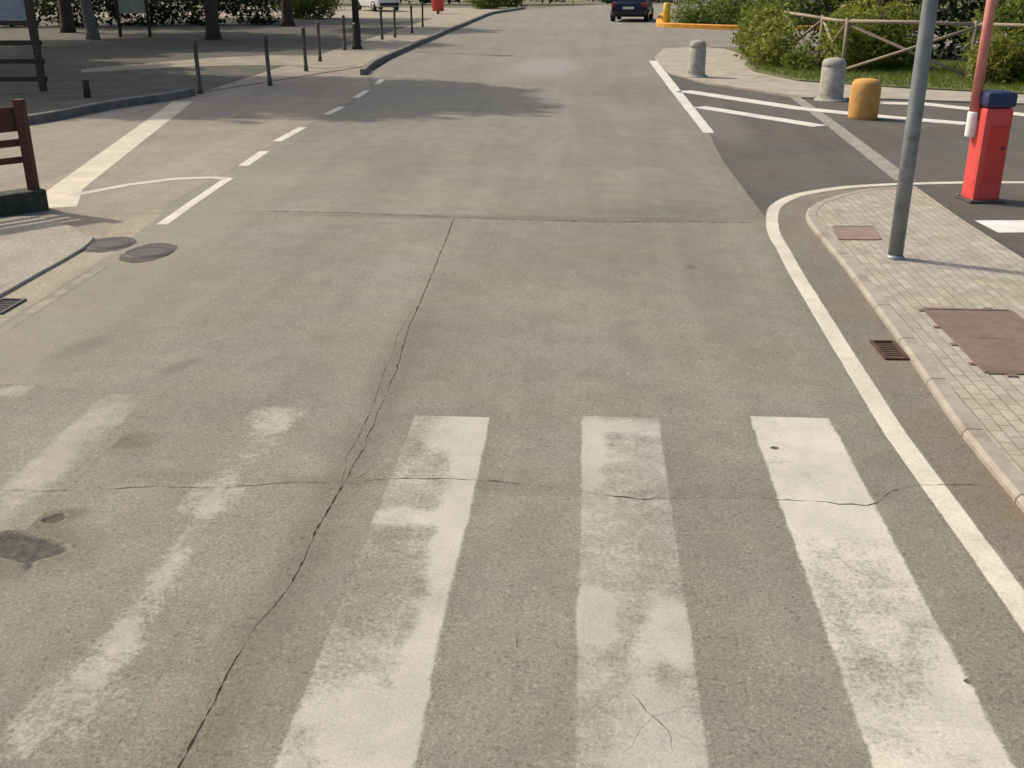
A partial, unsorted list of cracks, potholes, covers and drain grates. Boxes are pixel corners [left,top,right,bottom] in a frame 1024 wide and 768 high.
manhole cover [83,237,137,252]
utility cover [832,225,882,240]
drain grate [869,340,910,360]
crack [0,218,914,768]
manhole cover [119,243,177,263]
drain grate [0,298,27,315]
pothole [36,511,69,524]
utility cover [918,307,1024,378]
